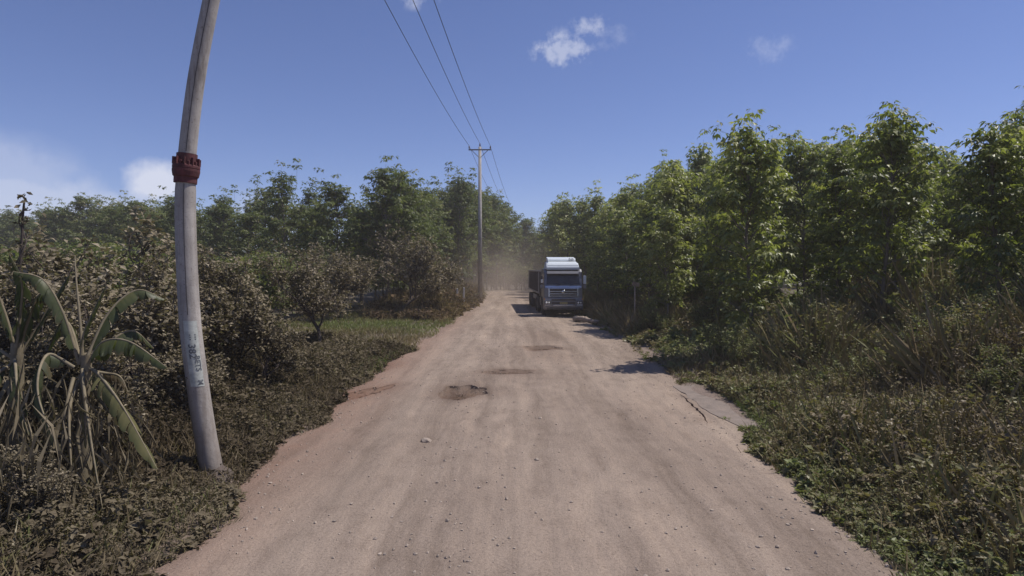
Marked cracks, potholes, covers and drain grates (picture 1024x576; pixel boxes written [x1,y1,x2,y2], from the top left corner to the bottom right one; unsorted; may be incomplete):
crack [680,394,708,423]
pothole [438,385,488,400]
pothole [343,384,396,400]
